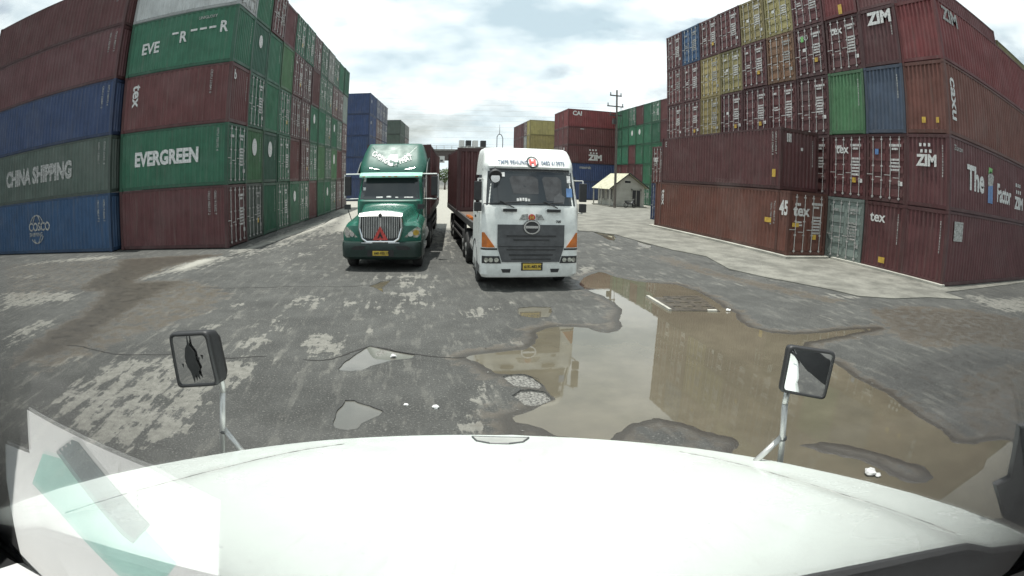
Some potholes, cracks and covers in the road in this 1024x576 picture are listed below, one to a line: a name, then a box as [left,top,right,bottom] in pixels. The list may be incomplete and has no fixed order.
pothole [333,400,383,430]
pothole [338,346,415,371]
pothole [512,389,552,406]
pothole [503,374,543,389]
crack [67,345,263,358]
